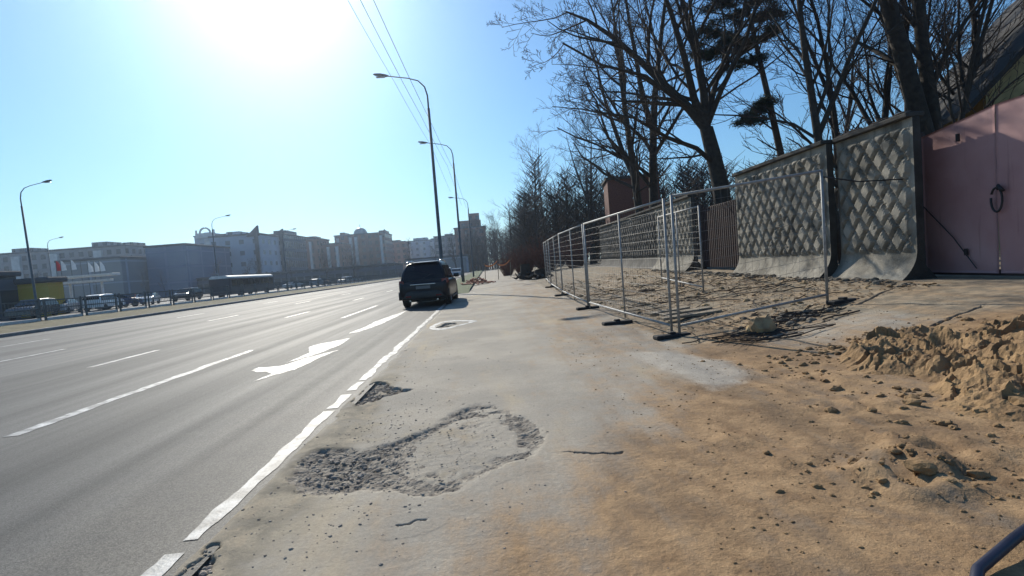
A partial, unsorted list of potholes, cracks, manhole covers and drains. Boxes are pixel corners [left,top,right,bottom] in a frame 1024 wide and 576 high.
pothole [339,378,428,412]
pothole [257,399,573,511]
crack [369,507,450,541]
crack [529,444,641,462]
